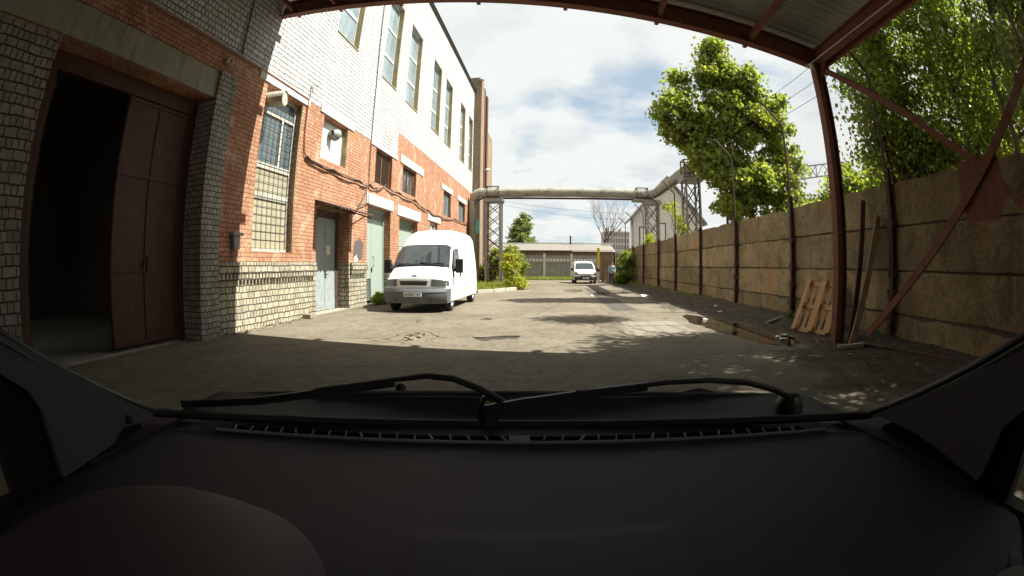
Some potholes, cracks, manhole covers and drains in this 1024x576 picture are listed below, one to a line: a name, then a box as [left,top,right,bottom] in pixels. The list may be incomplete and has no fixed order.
crack [343,317,496,347]
pothole [402,332,425,341]
